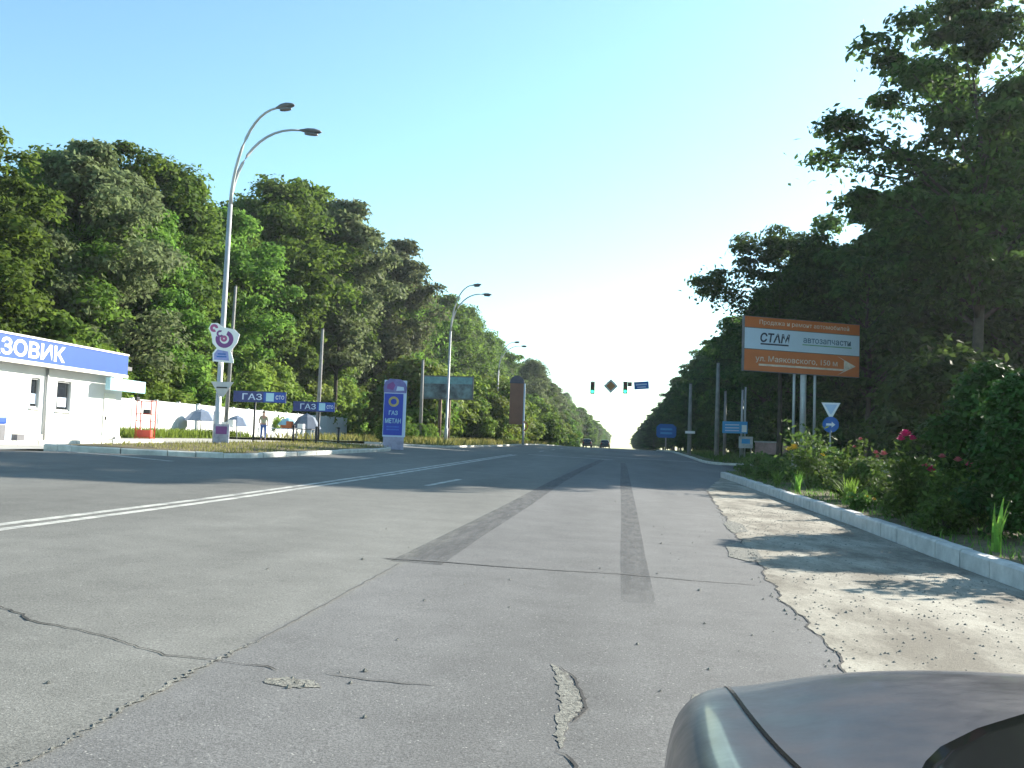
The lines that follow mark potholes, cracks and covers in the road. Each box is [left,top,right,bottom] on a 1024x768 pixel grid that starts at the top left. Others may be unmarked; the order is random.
crack [326,672,438,685]
crack [0,606,275,669]
pothole [551,664,588,748]
